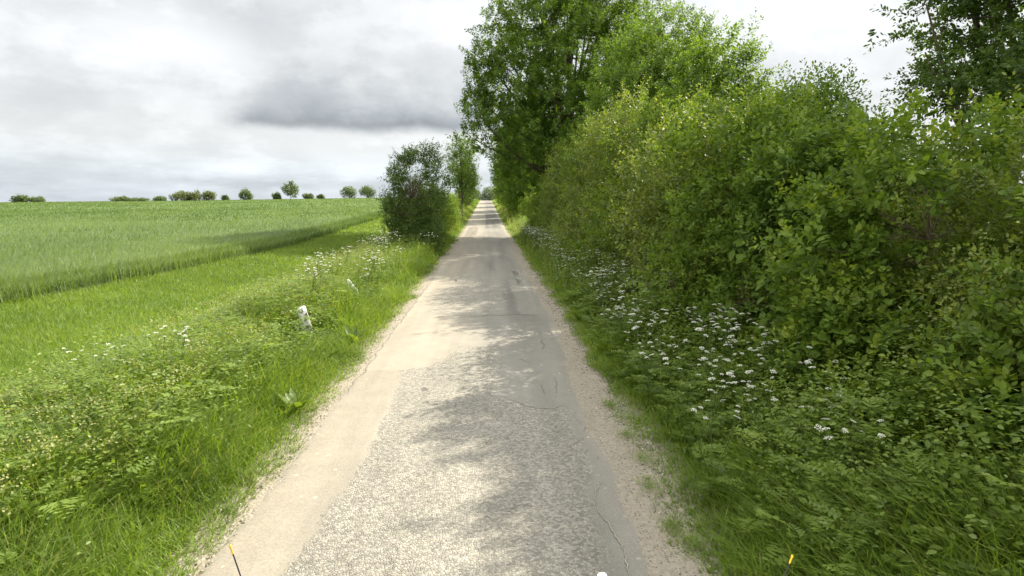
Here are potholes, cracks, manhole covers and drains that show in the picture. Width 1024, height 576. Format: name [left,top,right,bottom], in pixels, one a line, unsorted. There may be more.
crack [499,377,599,459]
crack [590,480,630,576]
